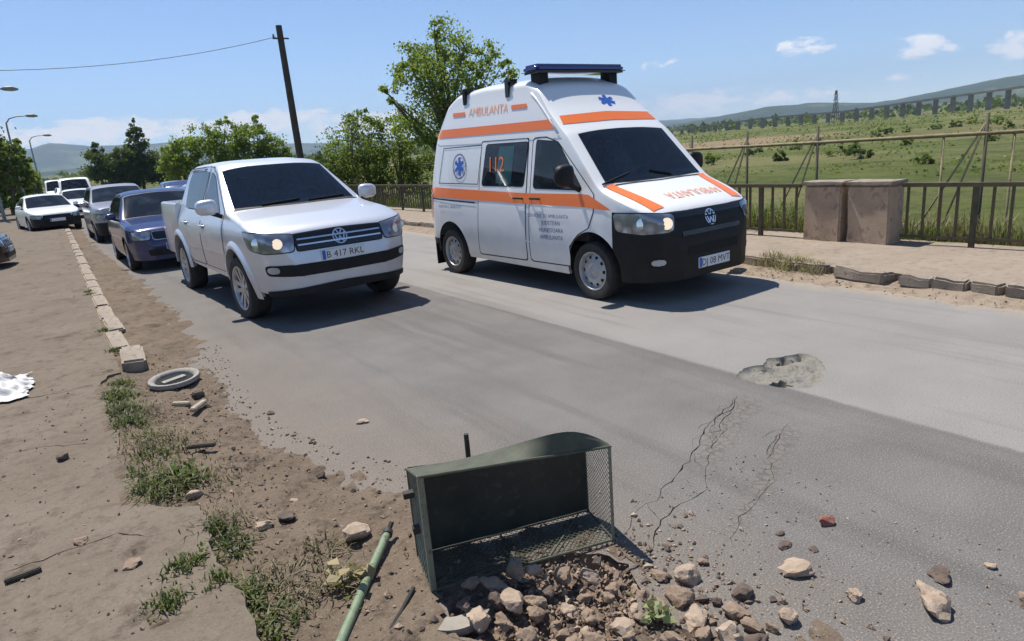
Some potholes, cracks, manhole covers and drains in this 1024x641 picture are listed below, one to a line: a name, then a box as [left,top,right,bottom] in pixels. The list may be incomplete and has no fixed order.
pothole [736,354,825,389]
crack [730,423,789,545]
crack [623,397,737,552]
